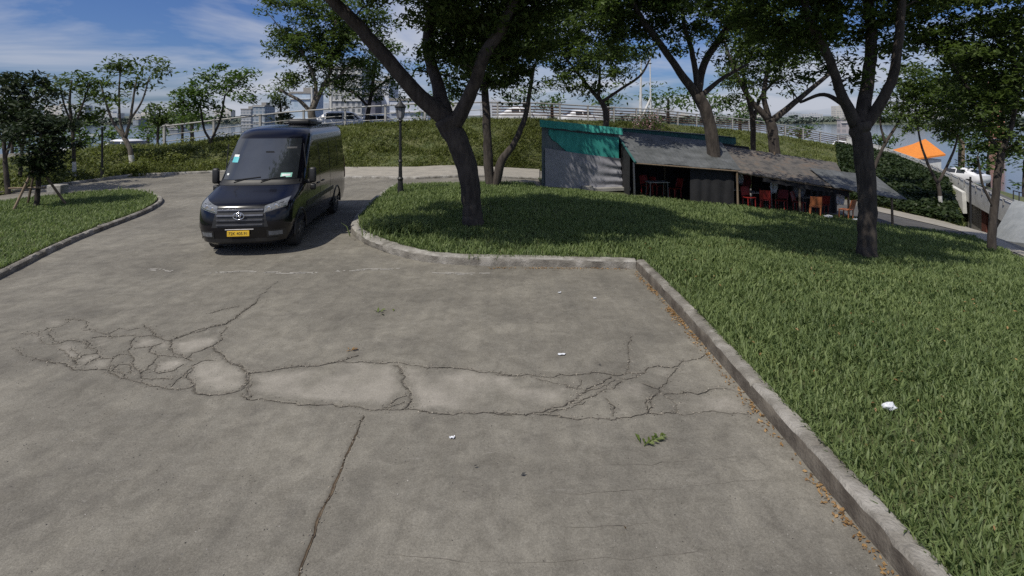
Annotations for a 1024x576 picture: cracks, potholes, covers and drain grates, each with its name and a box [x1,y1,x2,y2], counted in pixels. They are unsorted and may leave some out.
crack [16,284,743,576]
